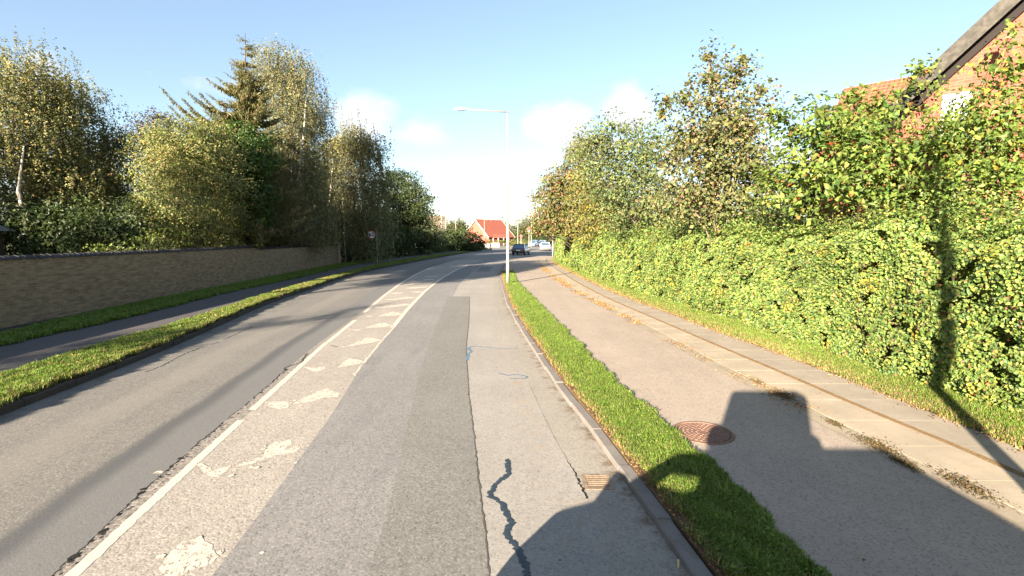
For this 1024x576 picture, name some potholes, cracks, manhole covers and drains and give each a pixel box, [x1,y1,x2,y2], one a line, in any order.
crack [567,461,588,499]
drain grate [581,474,615,490]
manhole cover [672,421,735,445]
